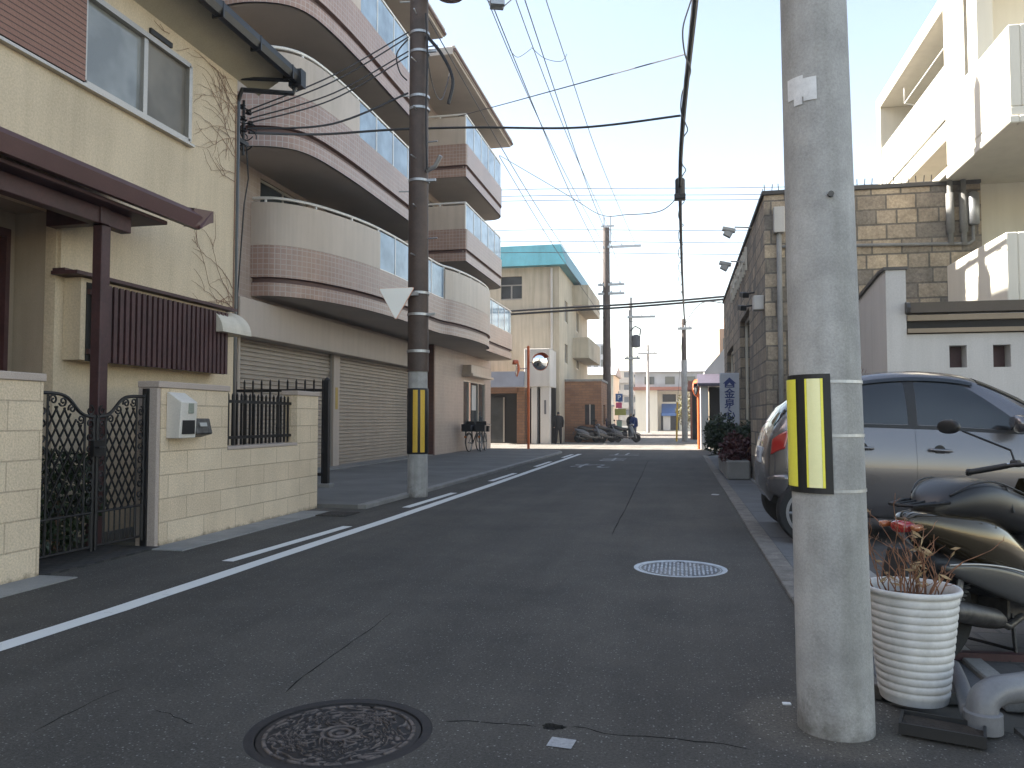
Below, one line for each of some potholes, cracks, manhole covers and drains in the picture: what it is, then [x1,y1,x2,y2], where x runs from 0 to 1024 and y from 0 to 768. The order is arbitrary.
manhole cover [242,699,433,768]
crack [577,726,750,750]
manhole cover [634,560,728,577]
